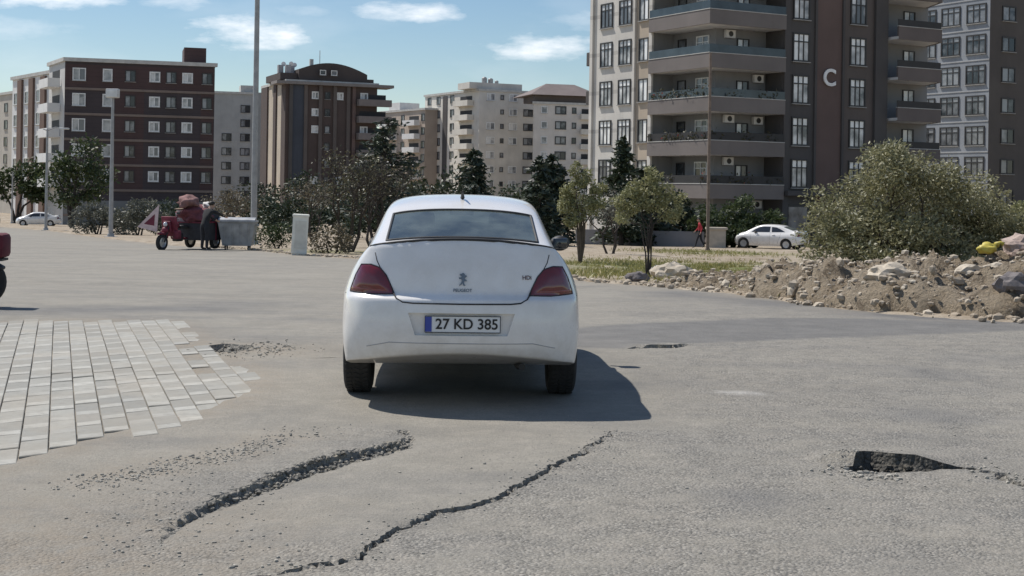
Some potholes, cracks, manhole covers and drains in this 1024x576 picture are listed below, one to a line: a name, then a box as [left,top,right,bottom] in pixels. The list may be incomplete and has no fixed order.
crack [259,430,616,576]
pothole [841,451,967,473]
pothole [208,344,252,352]
